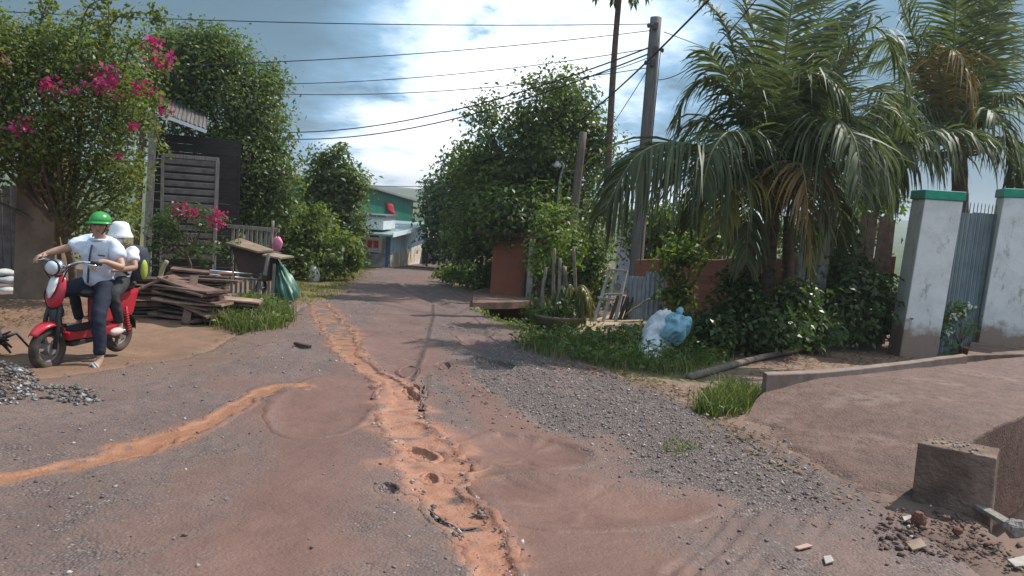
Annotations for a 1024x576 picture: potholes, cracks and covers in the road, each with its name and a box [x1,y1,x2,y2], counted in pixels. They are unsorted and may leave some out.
crack [418,385,427,411]
pothole [419,471,444,486]
crack [418,509,481,537]
pothole [373,480,404,497]
pothole [435,362,454,370]
pothole [402,445,444,464]
